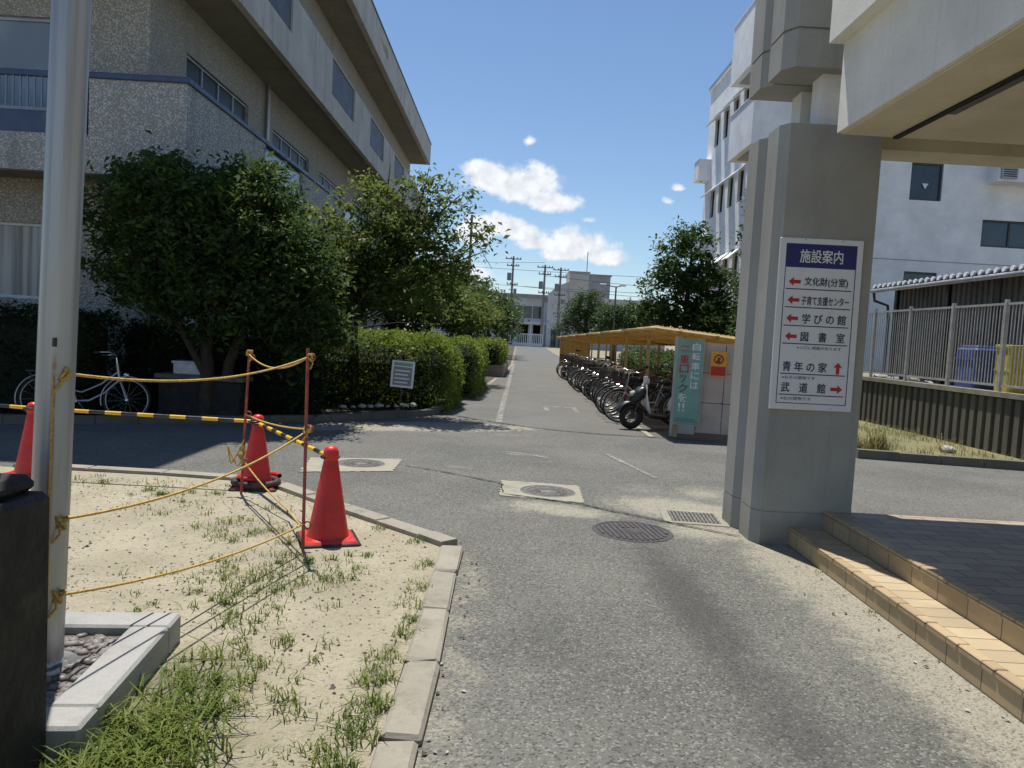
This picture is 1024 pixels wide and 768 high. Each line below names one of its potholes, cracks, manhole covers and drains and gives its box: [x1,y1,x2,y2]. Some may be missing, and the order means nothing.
manhole cover [298,457,403,473]
manhole cover [592,521,674,543]
manhole cover [498,480,584,503]
drain grate [658,508,730,528]
